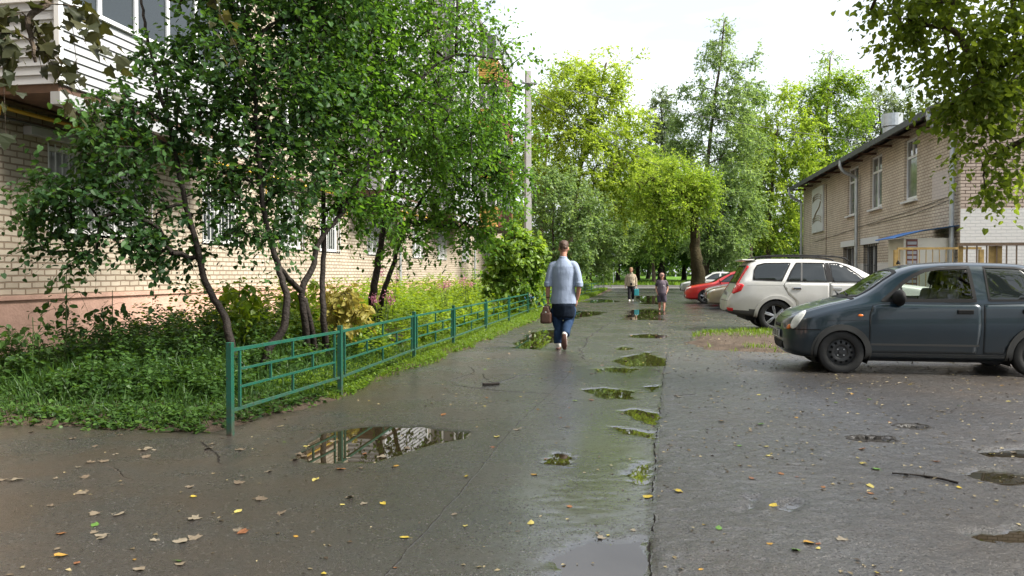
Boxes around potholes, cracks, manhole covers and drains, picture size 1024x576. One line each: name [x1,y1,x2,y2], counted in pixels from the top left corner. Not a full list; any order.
crack [106,465,133,480]
pothole [845,434,900,443]
